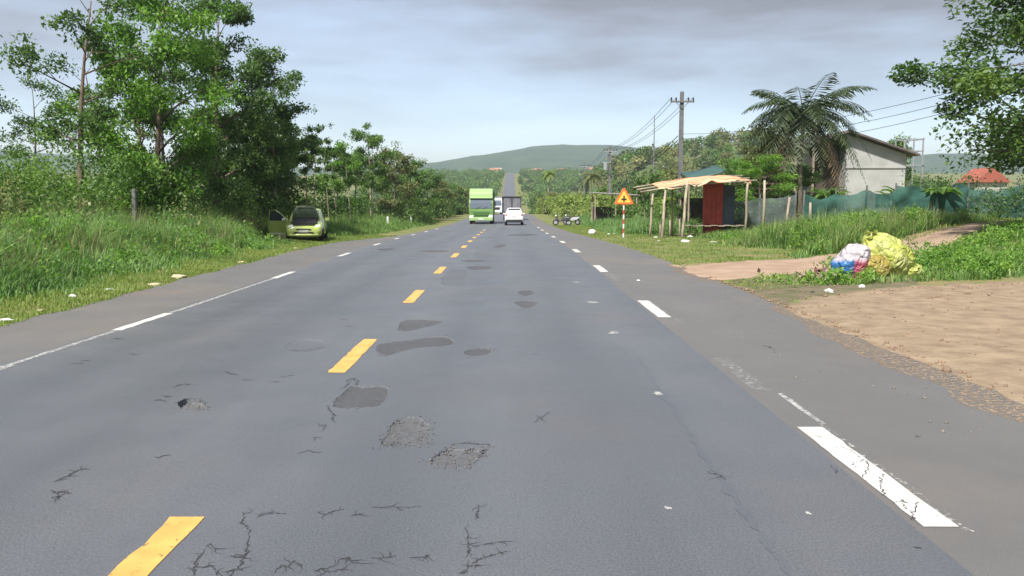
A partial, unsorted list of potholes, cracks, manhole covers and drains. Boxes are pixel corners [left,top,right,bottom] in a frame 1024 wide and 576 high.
crack [318,502,414,519]
pothole [178,398,207,410]
pothole [429,448,486,467]
crack [51,465,87,502]
crack [300,378,360,453]
crack [187,510,286,576]
crack [275,552,433,575]
crack [460,504,515,573]
pothole [381,416,431,447]
